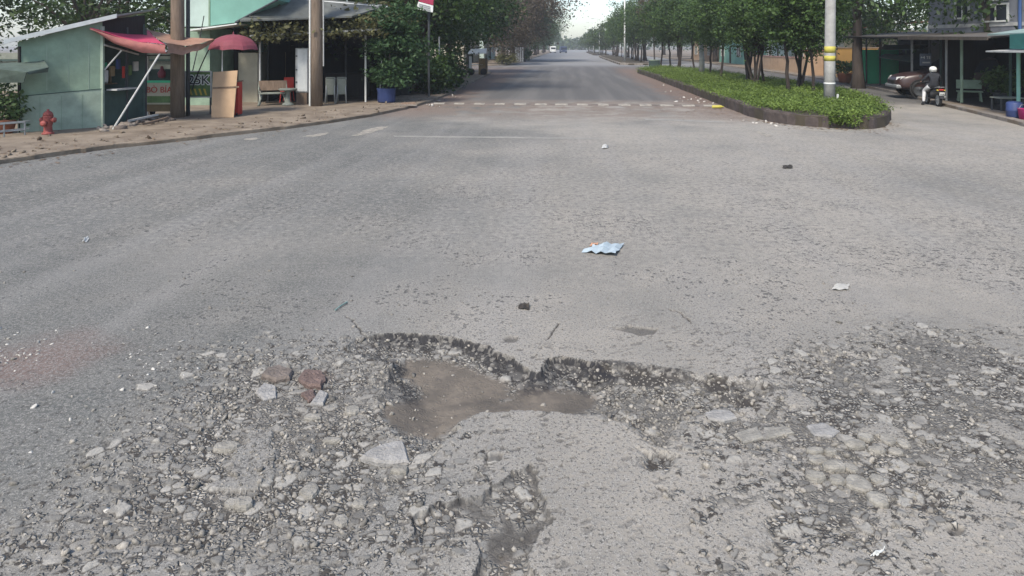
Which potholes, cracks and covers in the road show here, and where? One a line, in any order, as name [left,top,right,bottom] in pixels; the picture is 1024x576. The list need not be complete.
pothole [410,463,556,576]
crack [345,316,367,337]
pothole [342,332,641,466]
pothole [946,522,966,536]
crack [667,309,1024,576]
